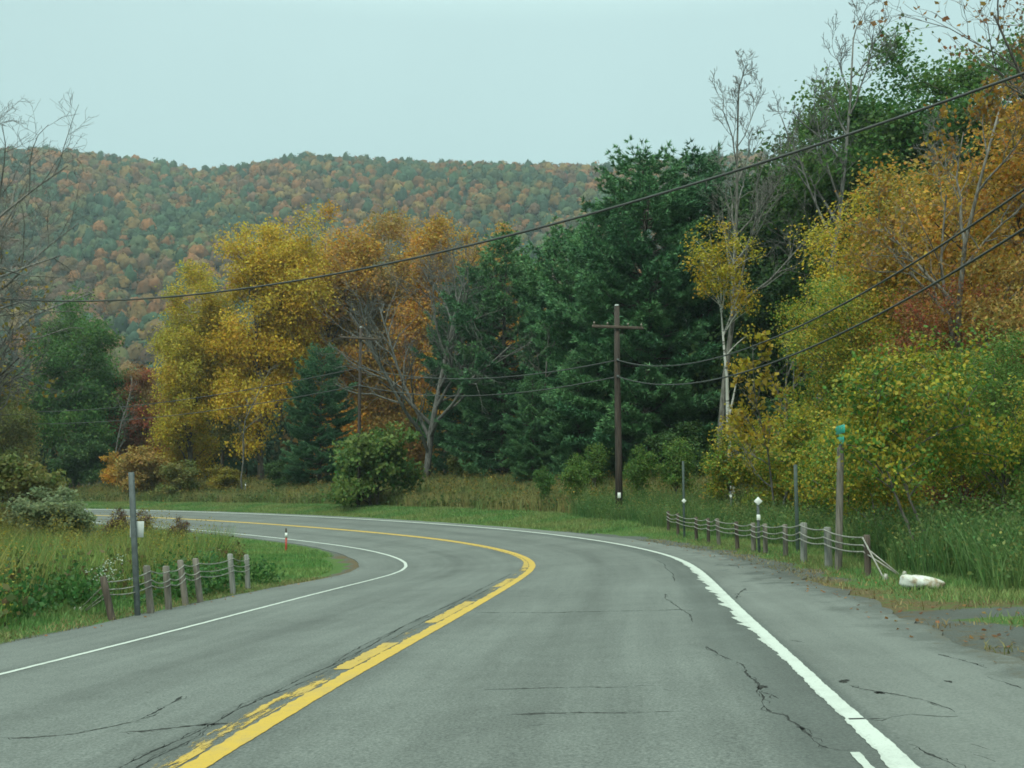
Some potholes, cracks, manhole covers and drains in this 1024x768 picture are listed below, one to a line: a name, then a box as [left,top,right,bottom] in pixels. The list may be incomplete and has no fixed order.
crack [0,692,228,739]
crack [938,654,1021,688]
crack [910,744,996,768]
crack [705,646,837,750]
crack [850,685,957,721]
crack [480,559,693,622]
